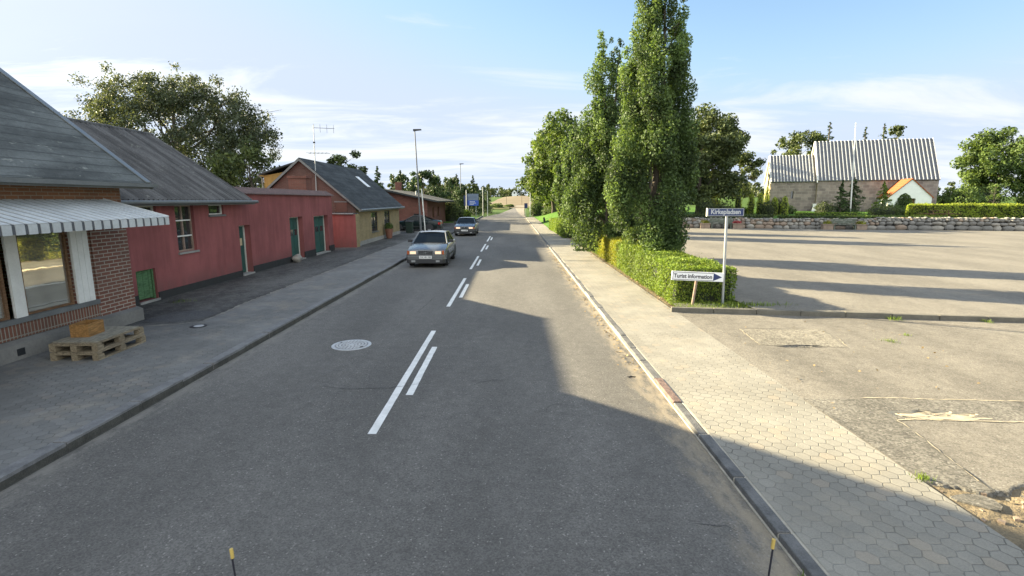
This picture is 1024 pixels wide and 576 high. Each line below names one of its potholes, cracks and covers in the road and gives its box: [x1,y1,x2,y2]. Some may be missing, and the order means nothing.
manhole cover [331,340,371,351]
